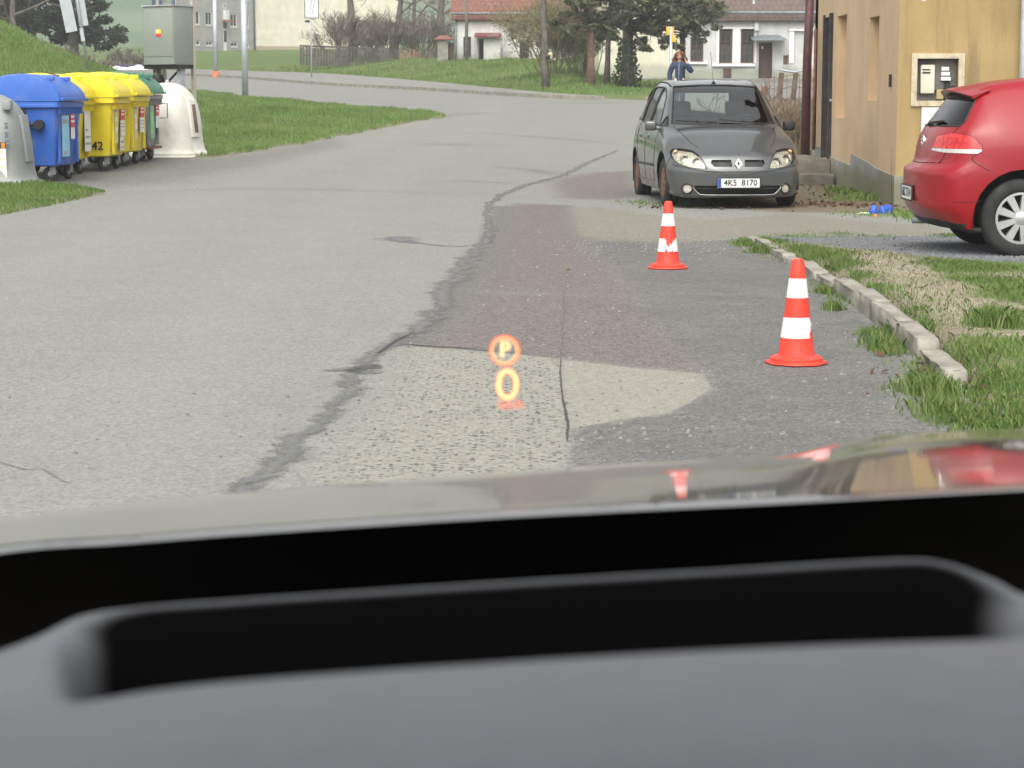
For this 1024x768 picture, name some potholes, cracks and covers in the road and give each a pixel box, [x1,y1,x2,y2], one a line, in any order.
crack [381,236,467,247]
